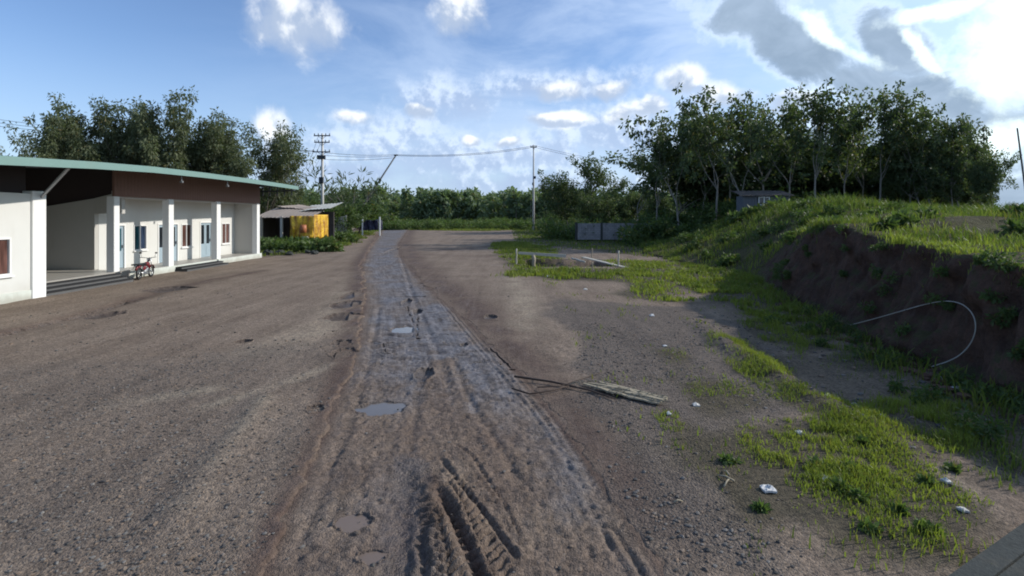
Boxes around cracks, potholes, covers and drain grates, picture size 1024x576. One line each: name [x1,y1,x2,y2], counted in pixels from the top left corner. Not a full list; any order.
pothole [330,510,380,535]
pothole [134,285,202,293]
pothole [336,289,366,301]
pothole [386,325,425,334]
pothole [325,300,366,310]
pothole [318,311,362,322]
pothole [412,365,437,385]
pothole [77,310,130,321]
pothole [353,548,391,566]
pothole [350,399,413,418]
